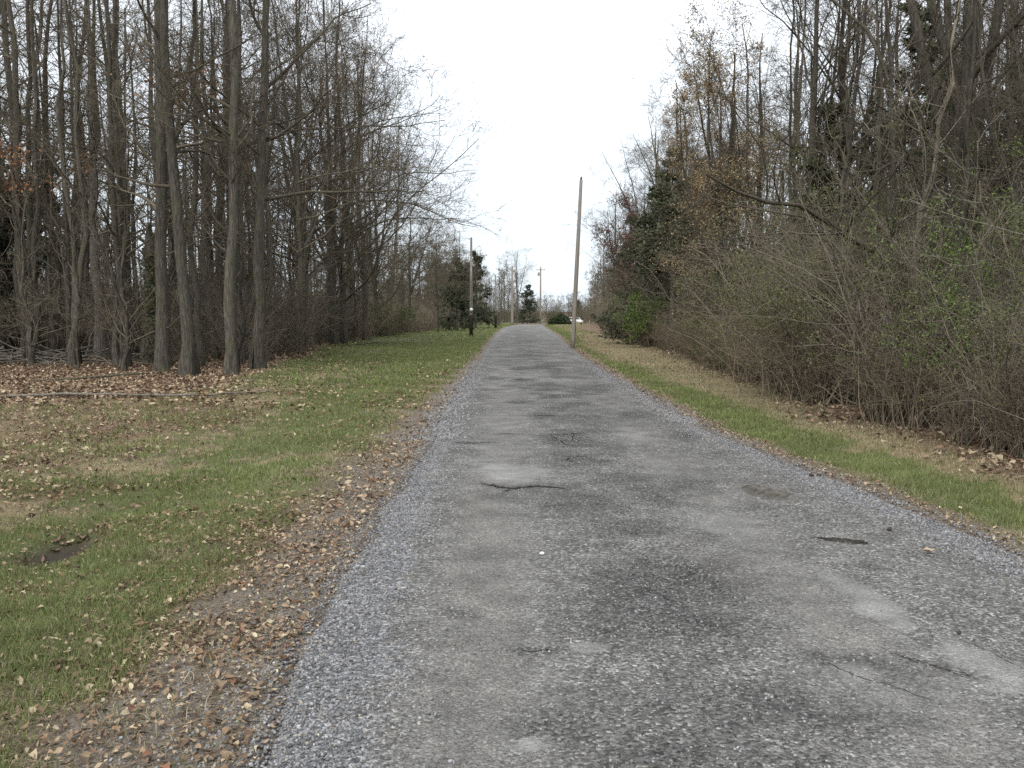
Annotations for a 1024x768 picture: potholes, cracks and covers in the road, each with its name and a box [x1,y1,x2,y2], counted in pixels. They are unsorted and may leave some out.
pothole [808,536,868,545]
crack [542,433,580,462]
crack [814,655,932,702]
crack [481,483,570,492]
